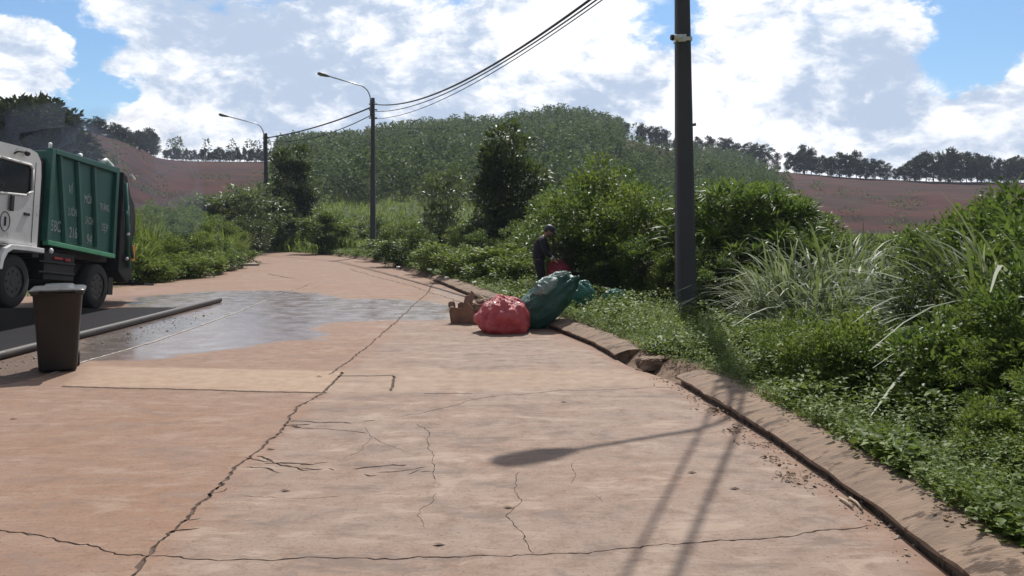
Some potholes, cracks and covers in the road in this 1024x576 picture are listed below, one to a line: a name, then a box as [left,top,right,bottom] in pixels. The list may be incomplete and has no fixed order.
crack [0,269,871,576]
